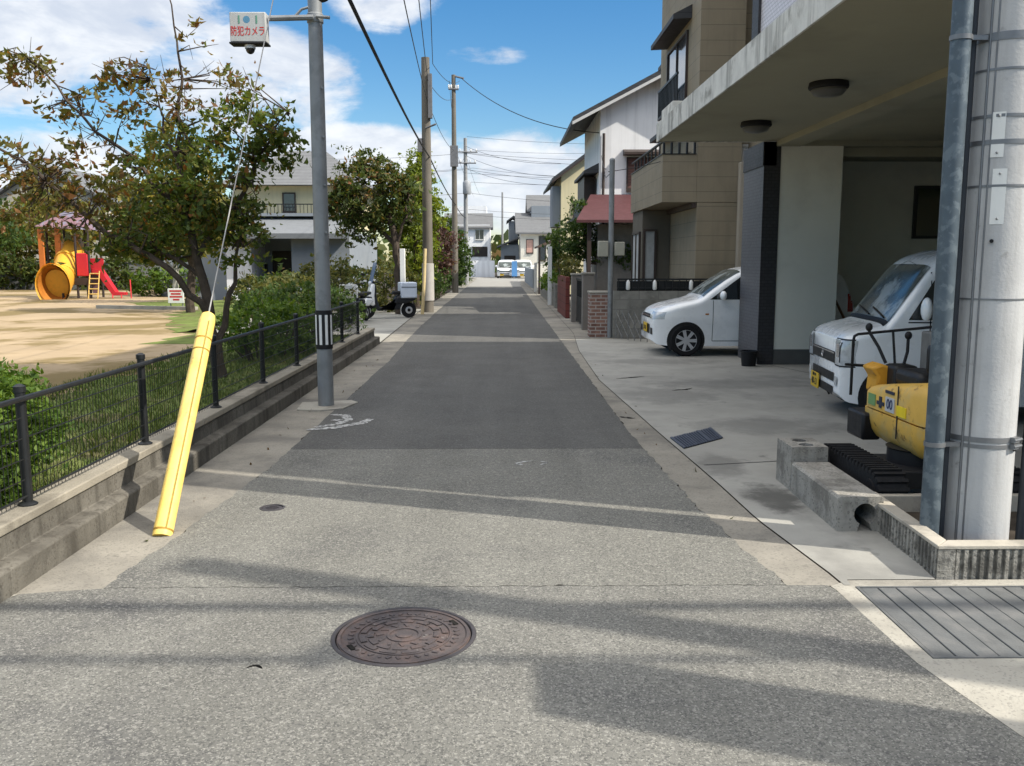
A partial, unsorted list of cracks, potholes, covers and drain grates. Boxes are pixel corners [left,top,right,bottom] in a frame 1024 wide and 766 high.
drain grate [670,427,723,449]
manhole cover [331,607,476,667]
